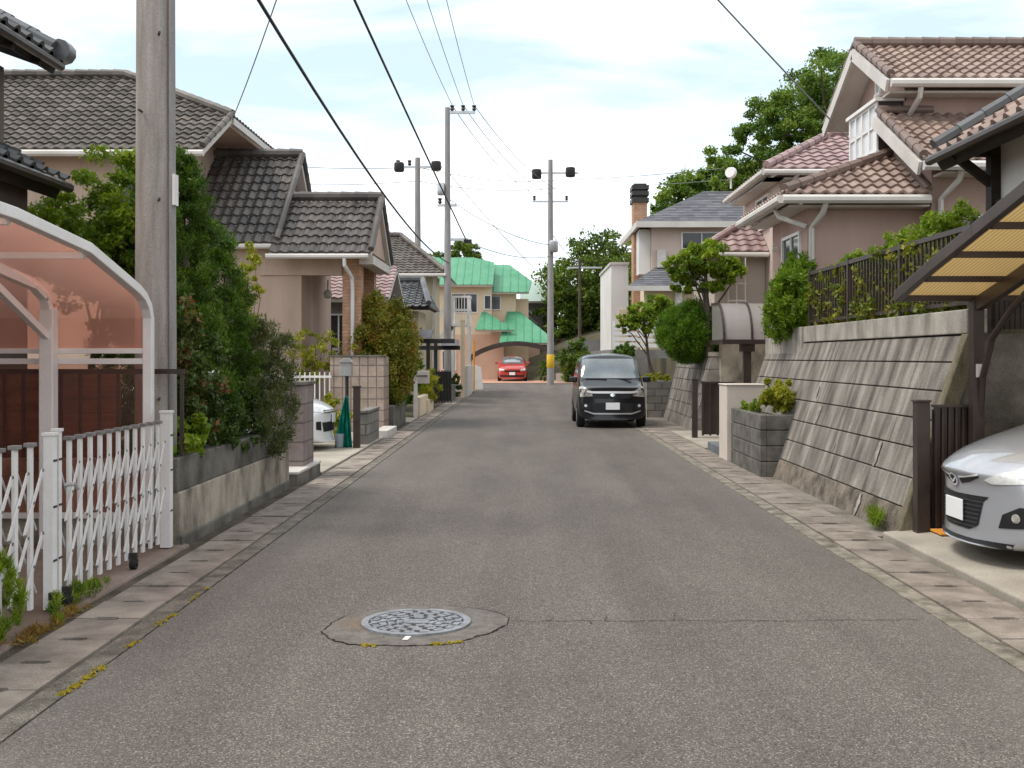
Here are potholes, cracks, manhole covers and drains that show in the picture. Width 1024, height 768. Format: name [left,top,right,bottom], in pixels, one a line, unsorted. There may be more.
manhole cover [361,608,471,637]
